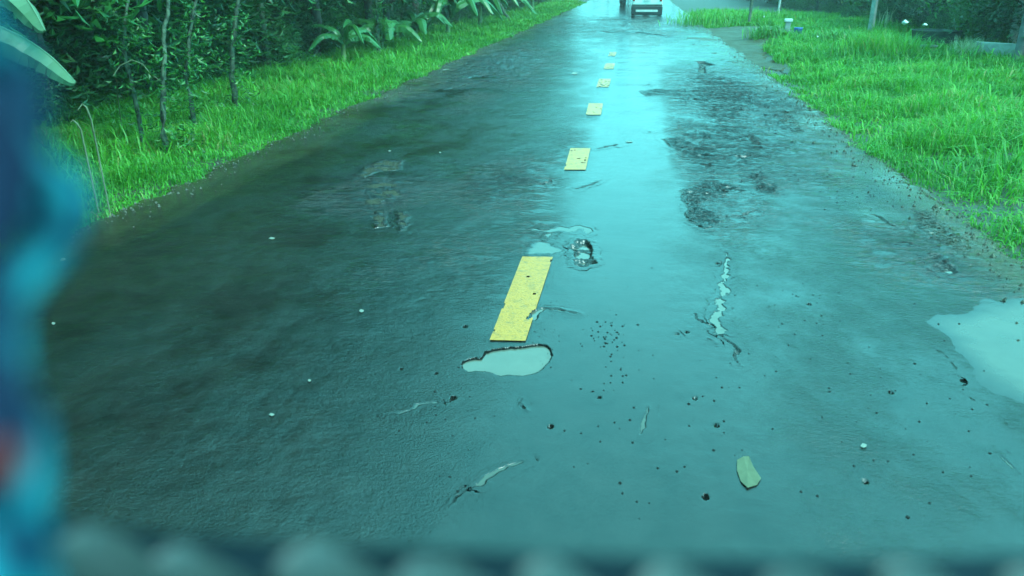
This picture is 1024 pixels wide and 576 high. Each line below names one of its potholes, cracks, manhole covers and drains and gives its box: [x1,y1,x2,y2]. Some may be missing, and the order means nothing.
crack [373,393,447,420]
crack [526,304,589,324]
pothole [562,237,605,271]
pothole [450,339,564,383]
crack [621,401,660,444]
crack [634,74,815,371]
crack [426,447,538,523]
